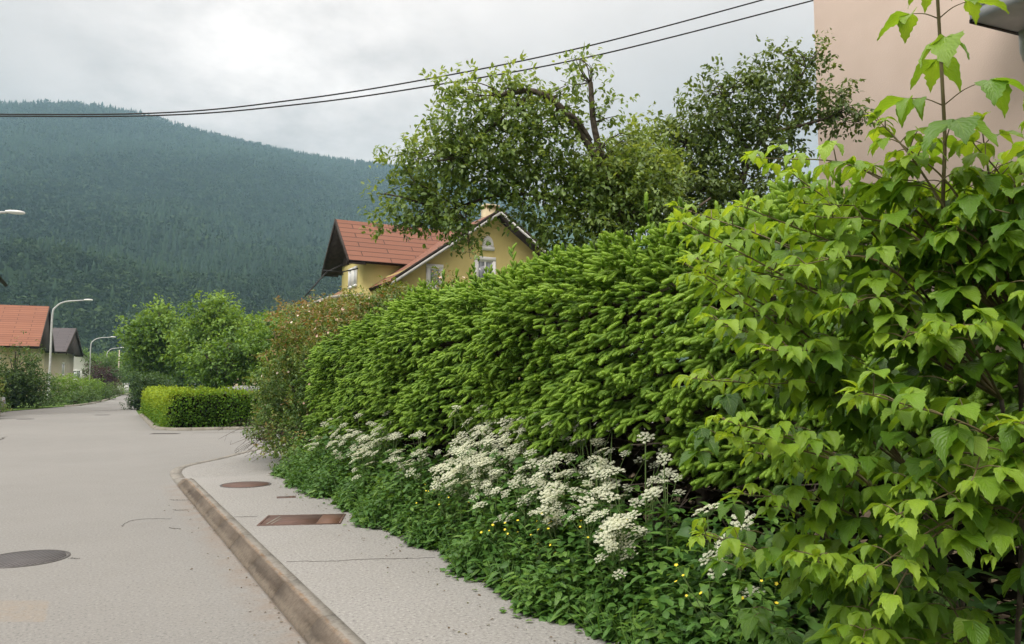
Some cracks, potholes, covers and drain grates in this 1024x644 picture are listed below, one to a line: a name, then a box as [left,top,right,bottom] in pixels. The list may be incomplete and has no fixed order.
manhole cover [0,550,71,568]
manhole cover [257,514,346,526]
